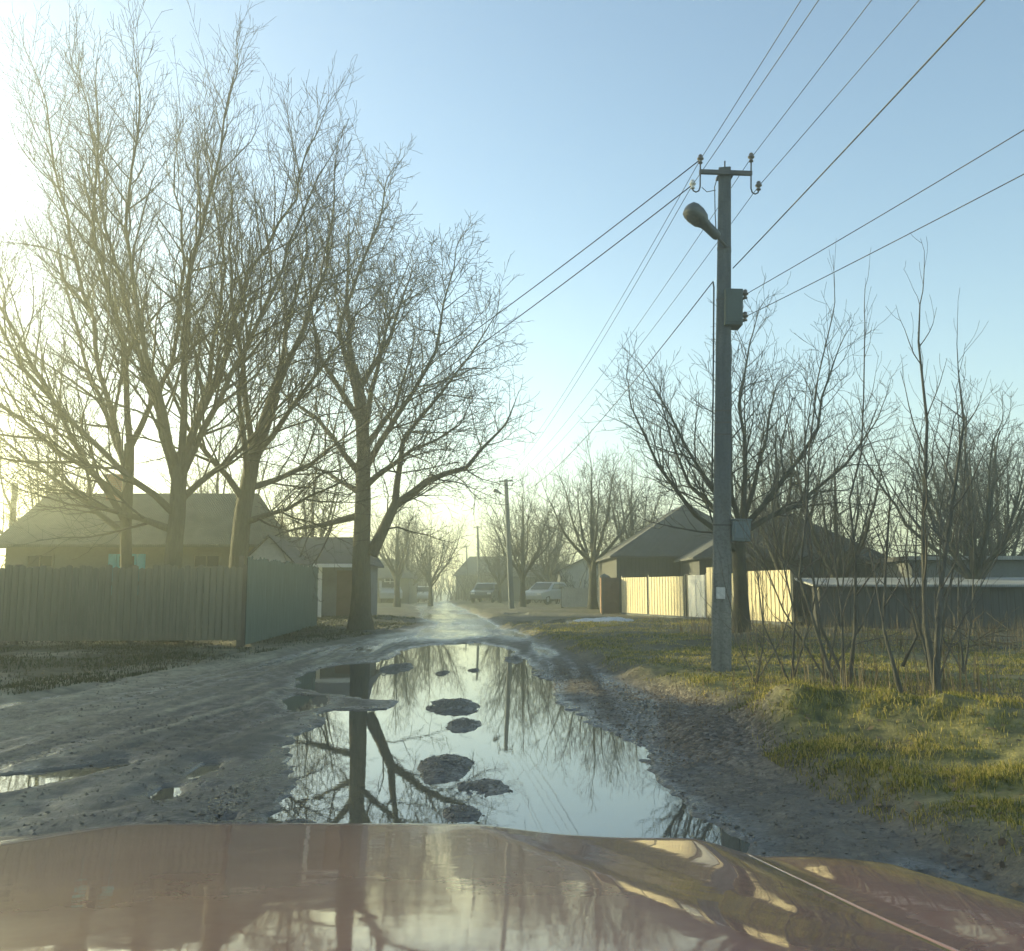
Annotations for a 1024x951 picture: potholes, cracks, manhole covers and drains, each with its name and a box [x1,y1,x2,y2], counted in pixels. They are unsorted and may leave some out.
pothole [179,759,227,779]
pothole [141,782,190,801]
pothole [0,758,139,793]
pothole [256,641,765,856]
